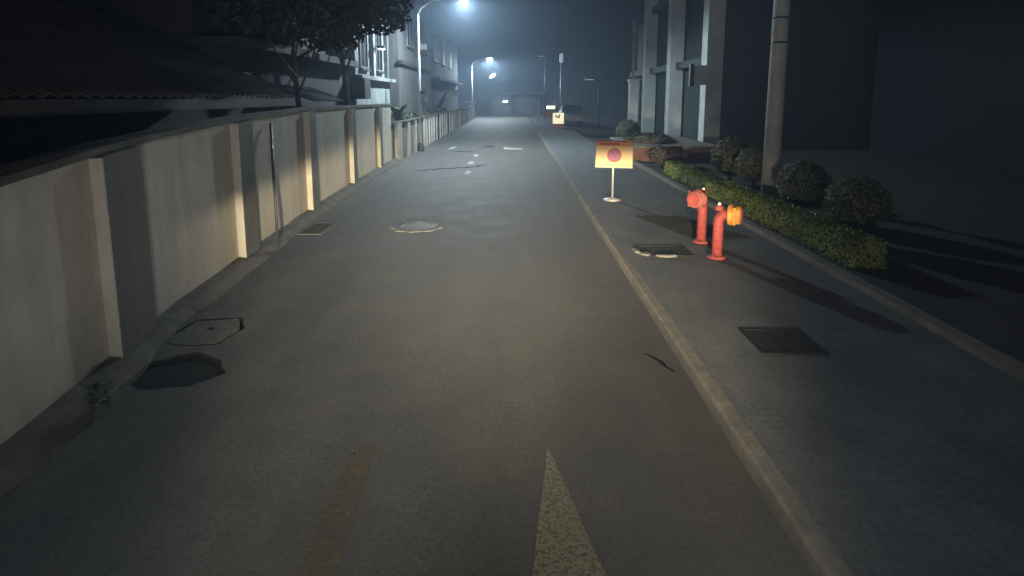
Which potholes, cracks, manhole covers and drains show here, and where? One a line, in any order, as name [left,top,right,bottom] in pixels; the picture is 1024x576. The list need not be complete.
manhole cover [388,220,444,233]
crack [644,353,675,372]
crack [414,151,487,171]
pothole [128,352,226,390]
drain grate [296,222,337,235]
